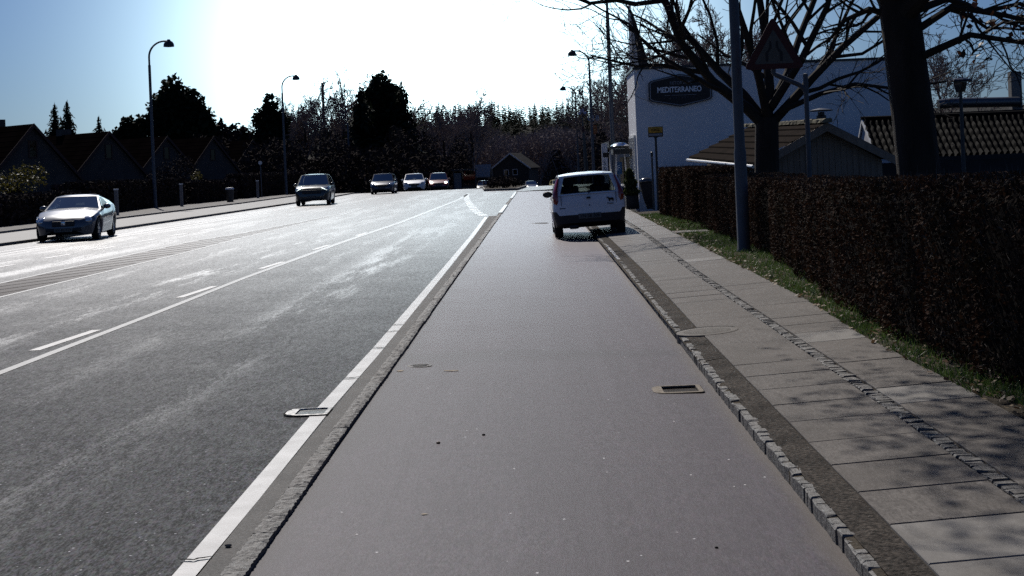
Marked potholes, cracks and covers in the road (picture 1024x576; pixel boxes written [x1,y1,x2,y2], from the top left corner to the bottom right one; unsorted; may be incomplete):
manhole cover [674,326,738,345]
drain grate [283,407,334,417]
drain grate [652,384,705,394]
